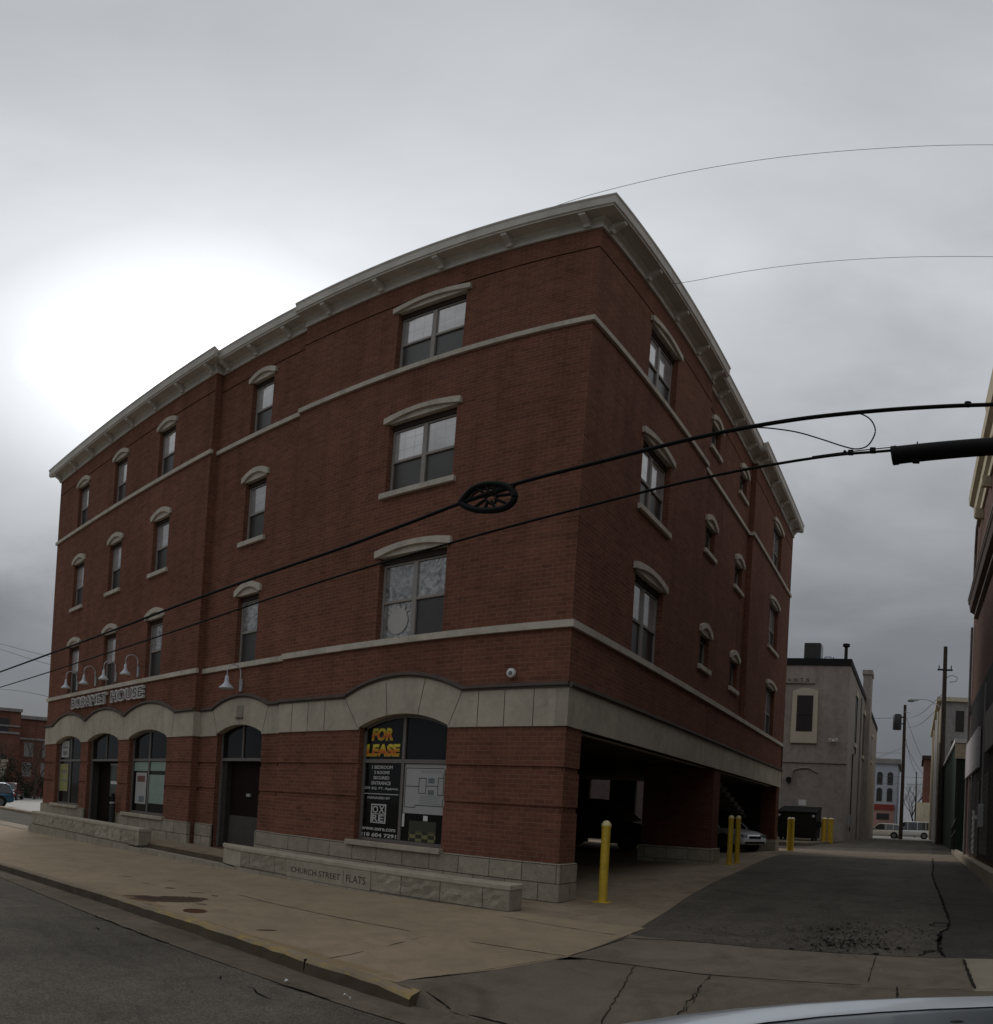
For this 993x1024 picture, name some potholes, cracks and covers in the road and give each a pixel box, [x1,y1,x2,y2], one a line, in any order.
crack [677,975,711,1015]
crack [601,966,635,1024]
crack [741,859,950,957]
